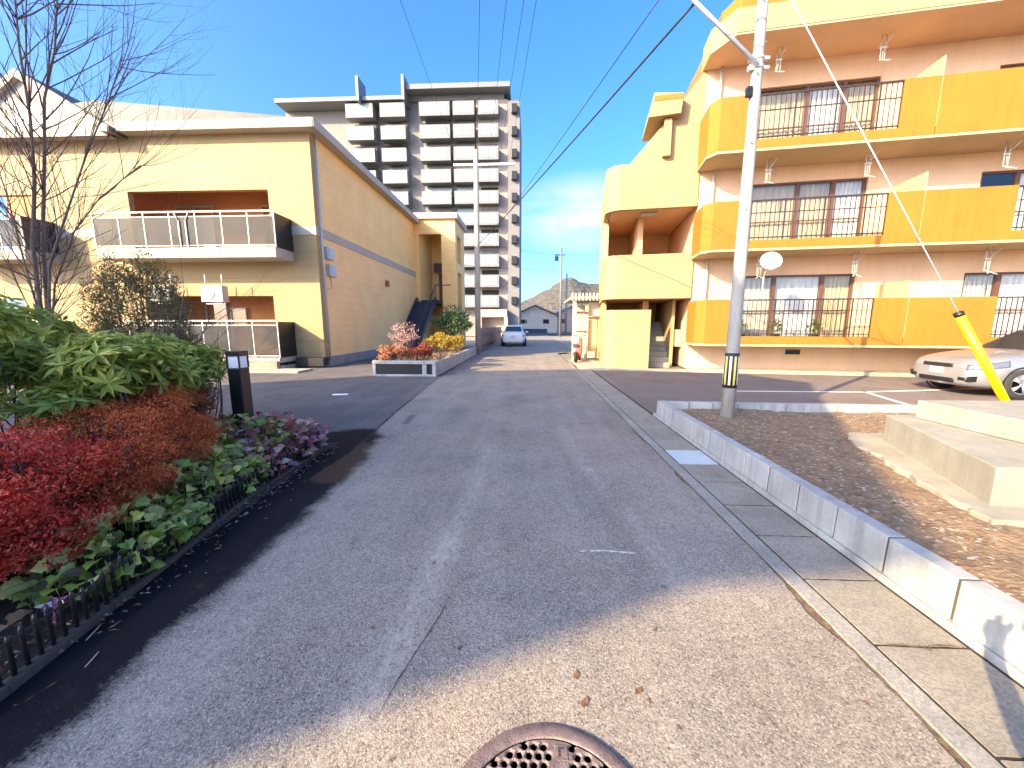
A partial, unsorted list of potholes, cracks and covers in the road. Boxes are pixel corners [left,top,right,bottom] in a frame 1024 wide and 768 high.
manhole cover [463,723,630,768]
